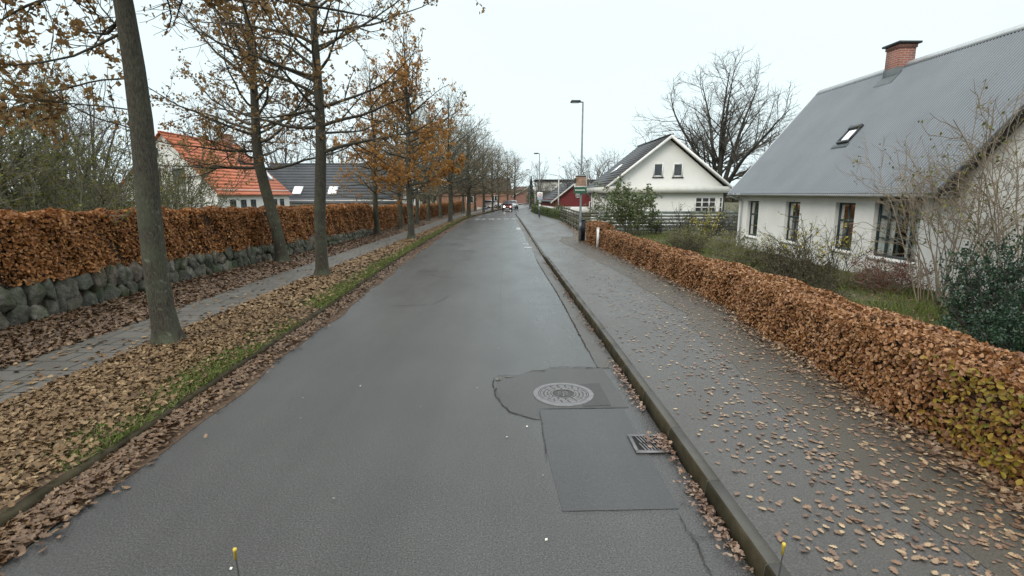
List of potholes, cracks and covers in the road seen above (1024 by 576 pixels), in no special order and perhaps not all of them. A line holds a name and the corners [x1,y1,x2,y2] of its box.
drain grate [627,434,673,453]
manhole cover [533,383,594,406]
crack [680,516,712,576]
